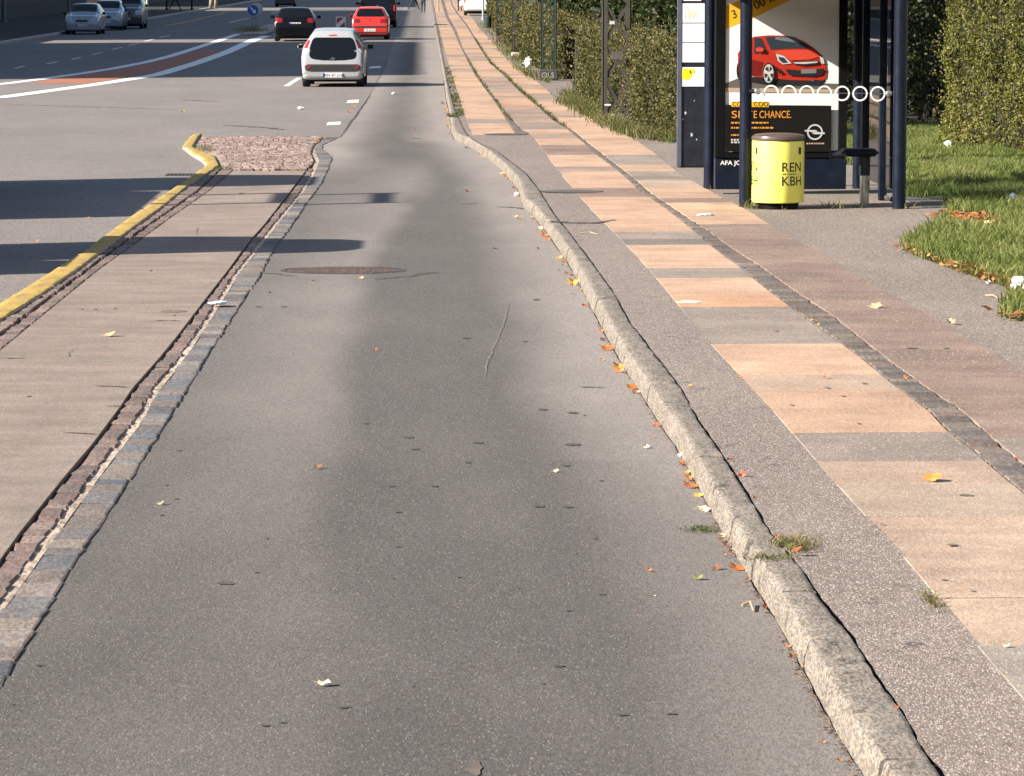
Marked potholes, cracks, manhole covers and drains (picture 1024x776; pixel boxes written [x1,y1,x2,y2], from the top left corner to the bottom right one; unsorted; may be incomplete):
crack [485,303,510,379]
